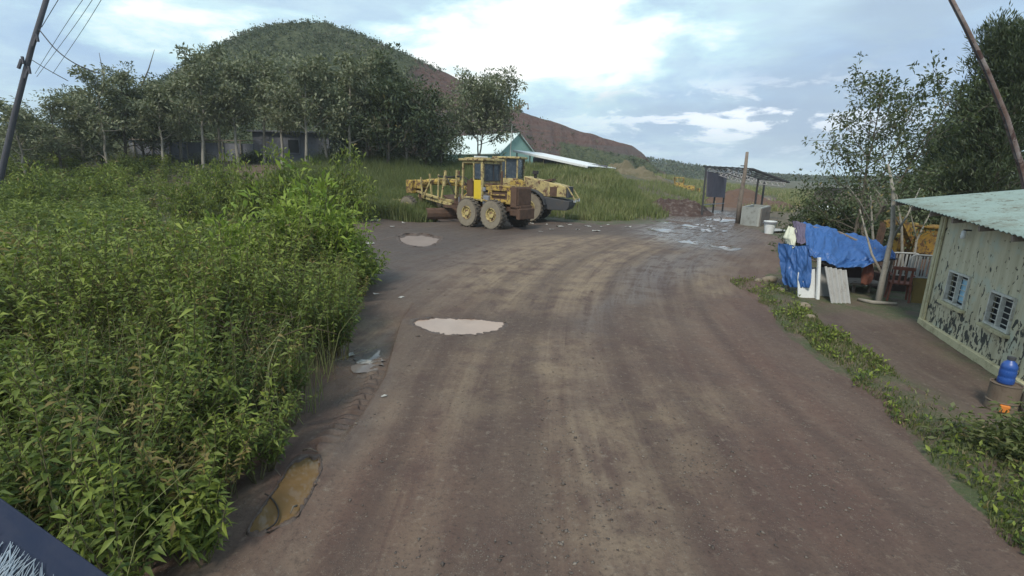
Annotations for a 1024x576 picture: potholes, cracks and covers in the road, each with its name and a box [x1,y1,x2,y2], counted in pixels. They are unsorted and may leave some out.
pothole [245,453,323,537]
pothole [395,232,444,247]
pothole [405,317,508,336]
